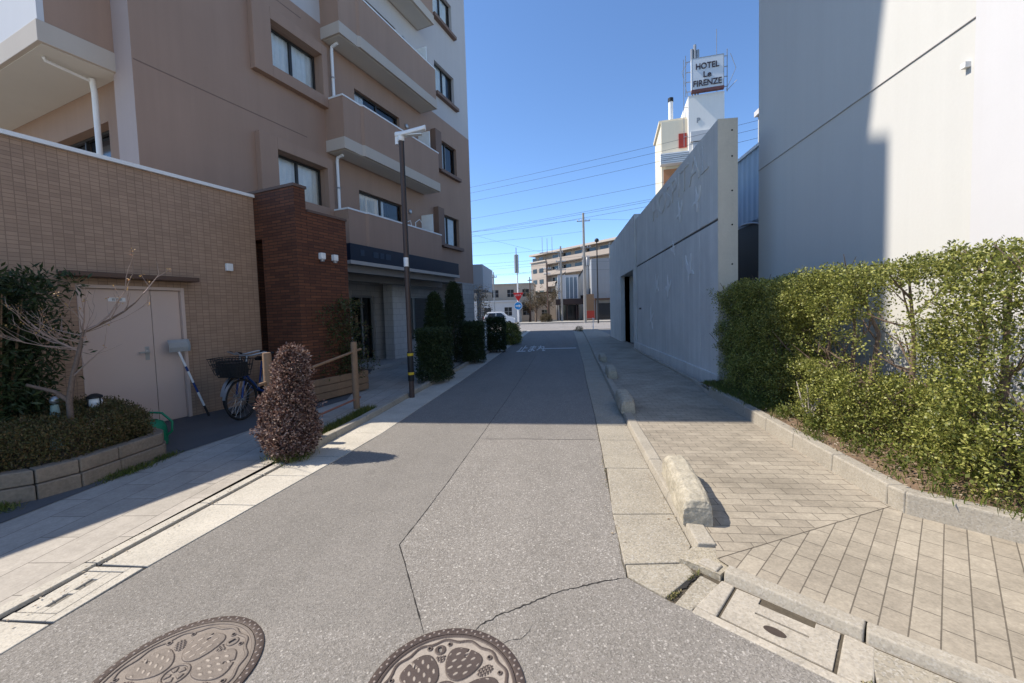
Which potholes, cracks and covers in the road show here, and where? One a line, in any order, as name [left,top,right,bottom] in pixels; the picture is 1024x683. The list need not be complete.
manhole cover [368,628,525,683]
crack [477,578,619,644]
manhole cover [92,616,264,683]
